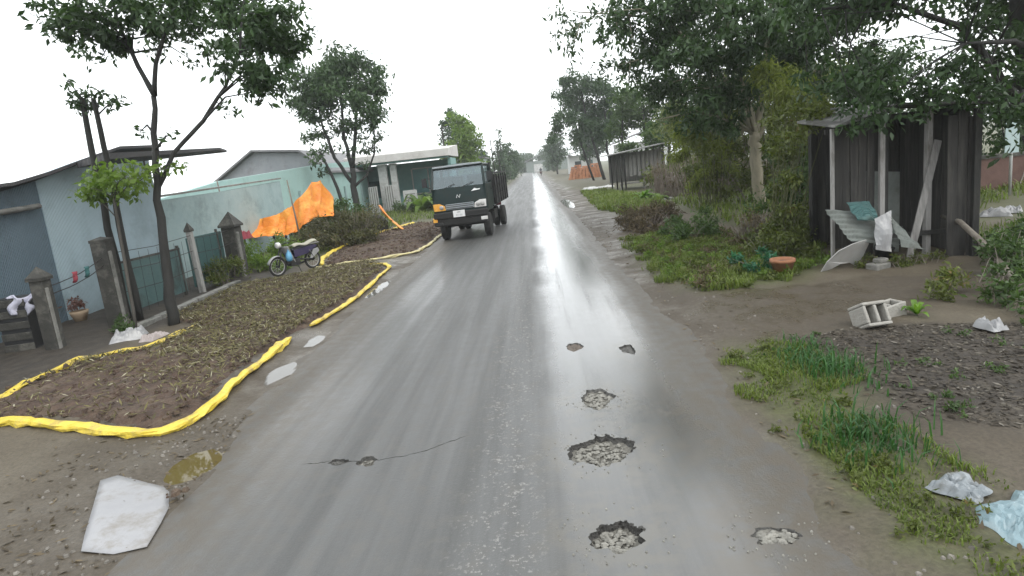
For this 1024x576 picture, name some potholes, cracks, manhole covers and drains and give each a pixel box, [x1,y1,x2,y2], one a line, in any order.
pothole [750,527,803,545]
pothole [566,343,584,352]
crack [308,435,468,464]
pothole [619,344,636,355]
pothole [567,434,636,467]
pothole [588,520,646,554]
pothole [581,388,616,410]
